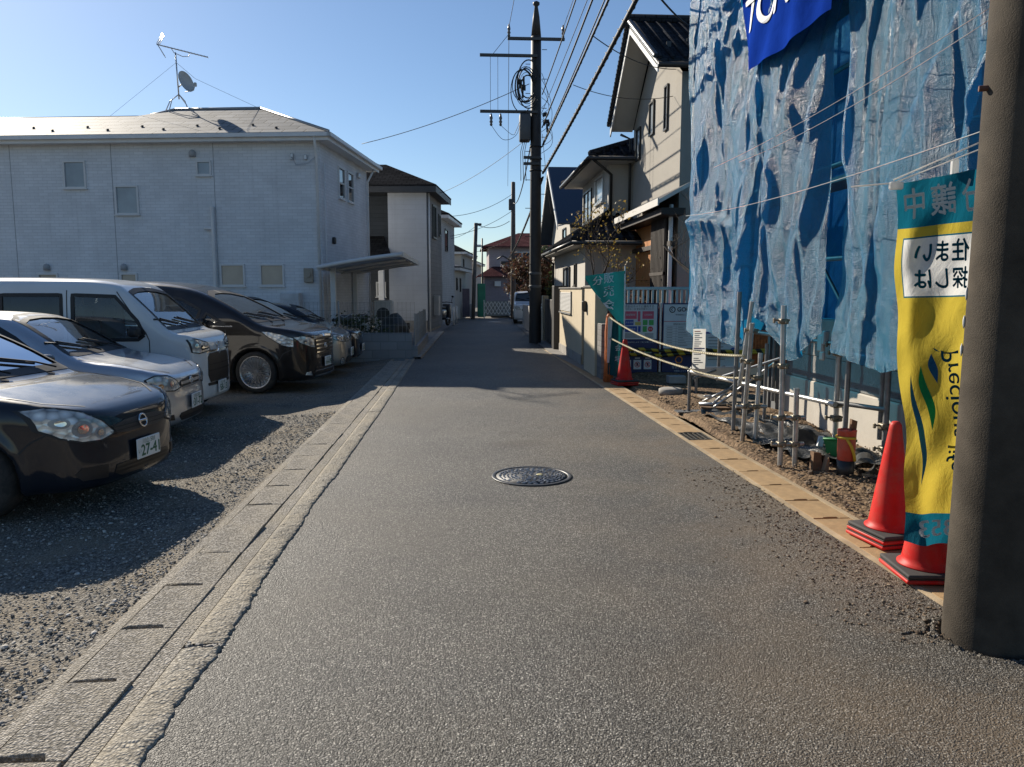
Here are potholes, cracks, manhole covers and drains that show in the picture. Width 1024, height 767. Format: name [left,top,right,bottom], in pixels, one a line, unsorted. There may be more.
manhole cover [492,466,572,487]
drain grate [679,432,713,440]
crack [185,640,226,648]
